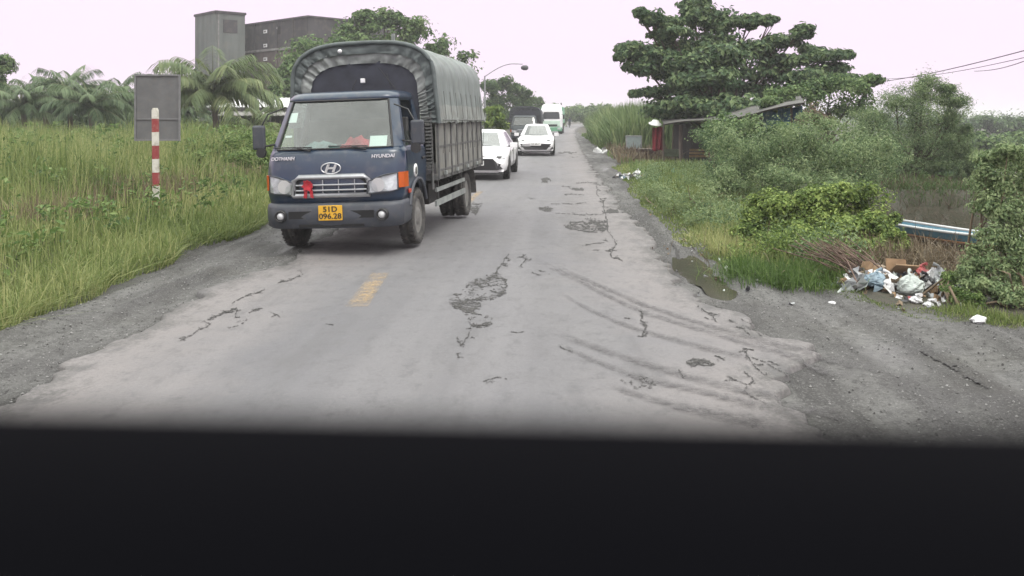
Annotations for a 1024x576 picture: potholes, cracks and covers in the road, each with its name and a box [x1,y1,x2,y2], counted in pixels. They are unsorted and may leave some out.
crack [624,310,647,337]
pothole [686,358,714,367]
crack [180,269,303,341]
pothole [564,219,608,233]
pothole [449,274,508,313]
crack [551,181,623,261]
crack [697,305,788,404]
